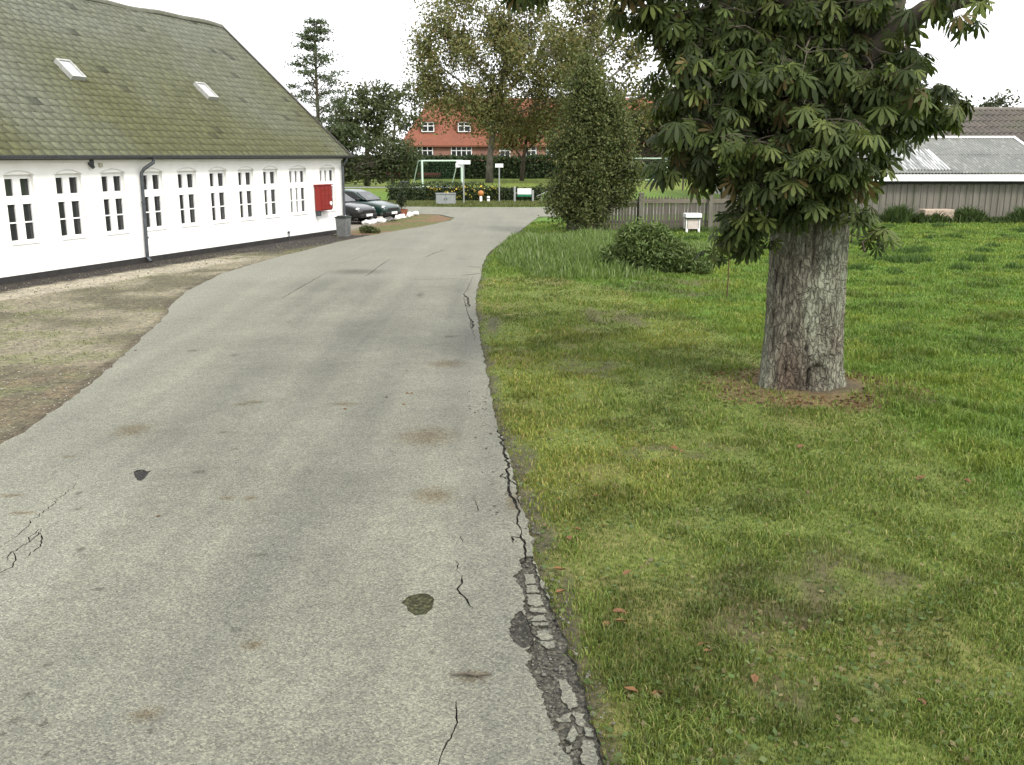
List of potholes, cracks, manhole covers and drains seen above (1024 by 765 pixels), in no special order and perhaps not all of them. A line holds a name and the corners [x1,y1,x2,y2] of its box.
crack [0,487,74,573]
crack [439,703,458,763]
crack [497,430,604,765]
pothole [134,470,152,481]
